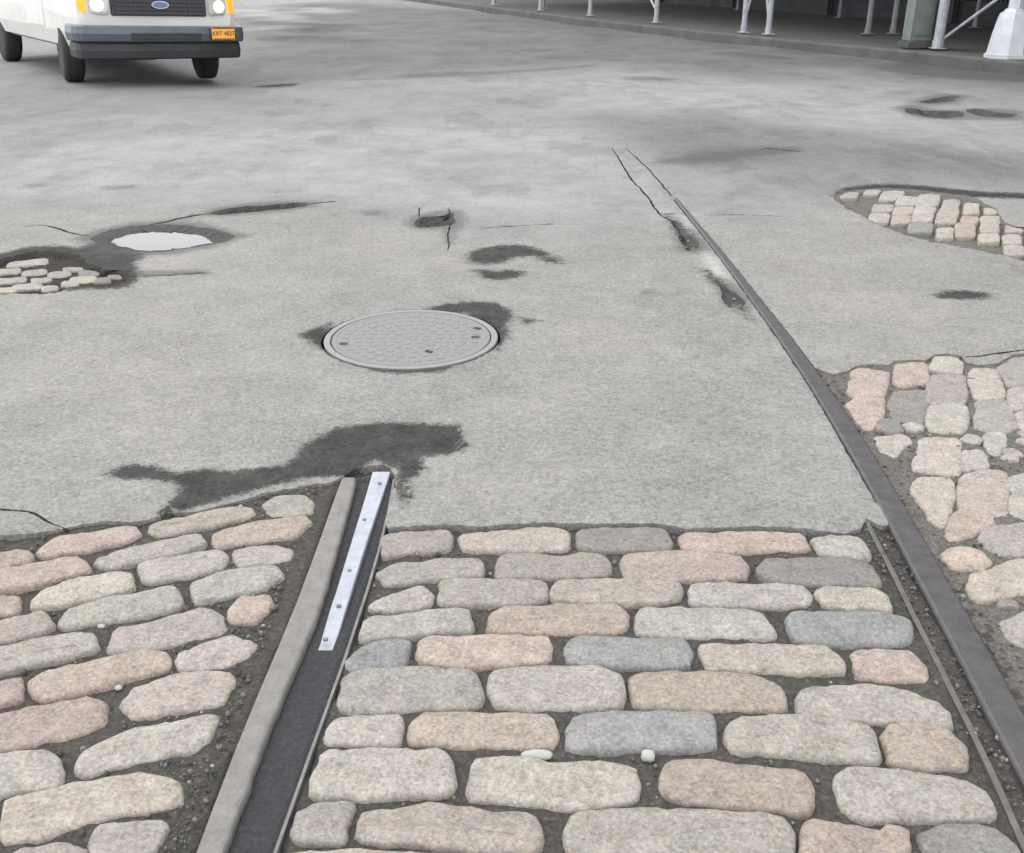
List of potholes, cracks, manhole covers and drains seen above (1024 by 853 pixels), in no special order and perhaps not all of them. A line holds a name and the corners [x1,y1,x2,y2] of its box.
crack [612,148,685,243]
crack [0,508,69,533]
crack [961,349,1024,360]
crack [25,225,86,236]
pothole [90,224,236,252]
pothole [414,213,456,228]
crack [149,213,209,225]
manhole cover [324,310,499,371]
crack [418,209,587,251]
